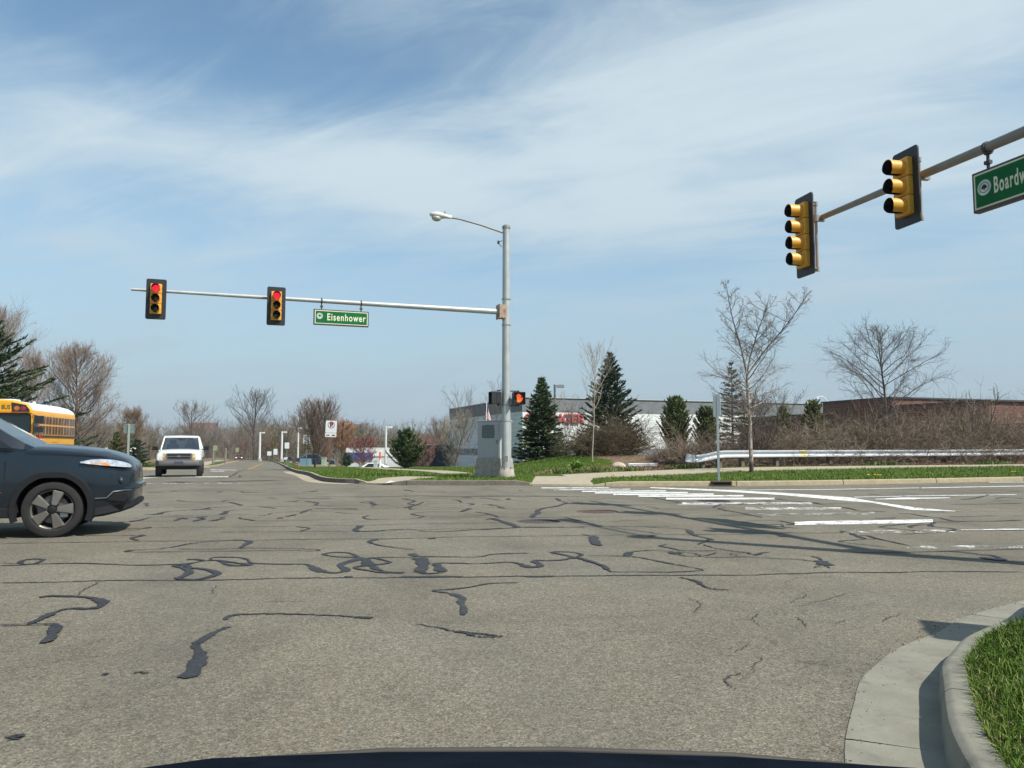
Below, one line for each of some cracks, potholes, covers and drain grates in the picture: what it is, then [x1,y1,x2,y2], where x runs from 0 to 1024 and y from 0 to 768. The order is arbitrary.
crack [723,644,763,689]
